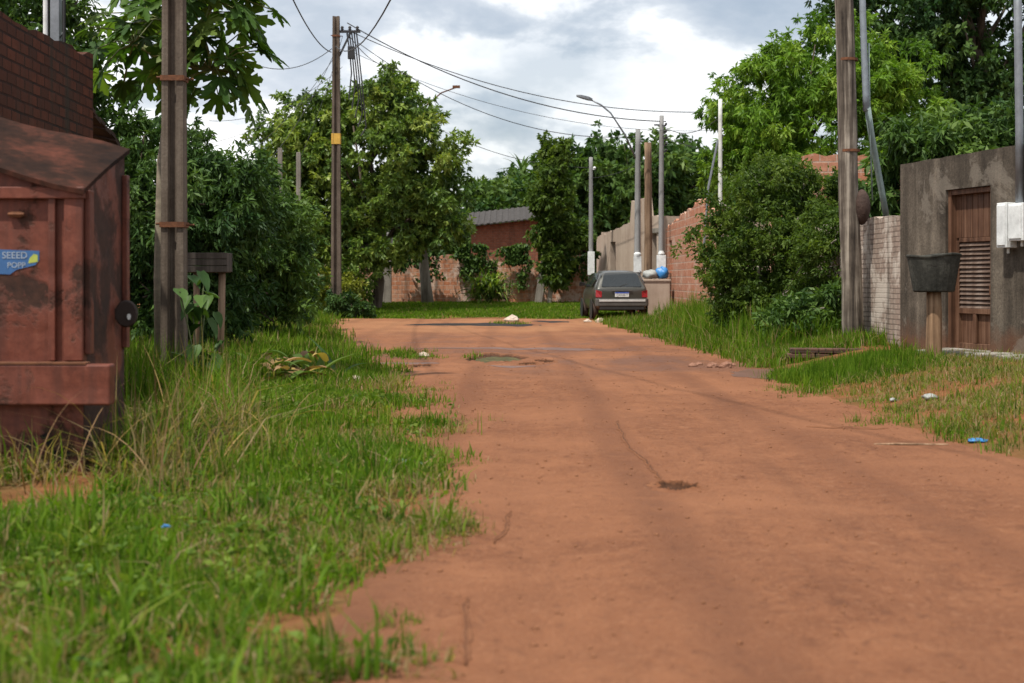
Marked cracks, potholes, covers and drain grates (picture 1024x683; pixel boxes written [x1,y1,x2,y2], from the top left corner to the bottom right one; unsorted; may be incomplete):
crack [615,420,662,480]
pothole [451,352,542,366]
crack [459,597,473,665]
crack [493,511,512,544]
pothole [646,479,710,494]
